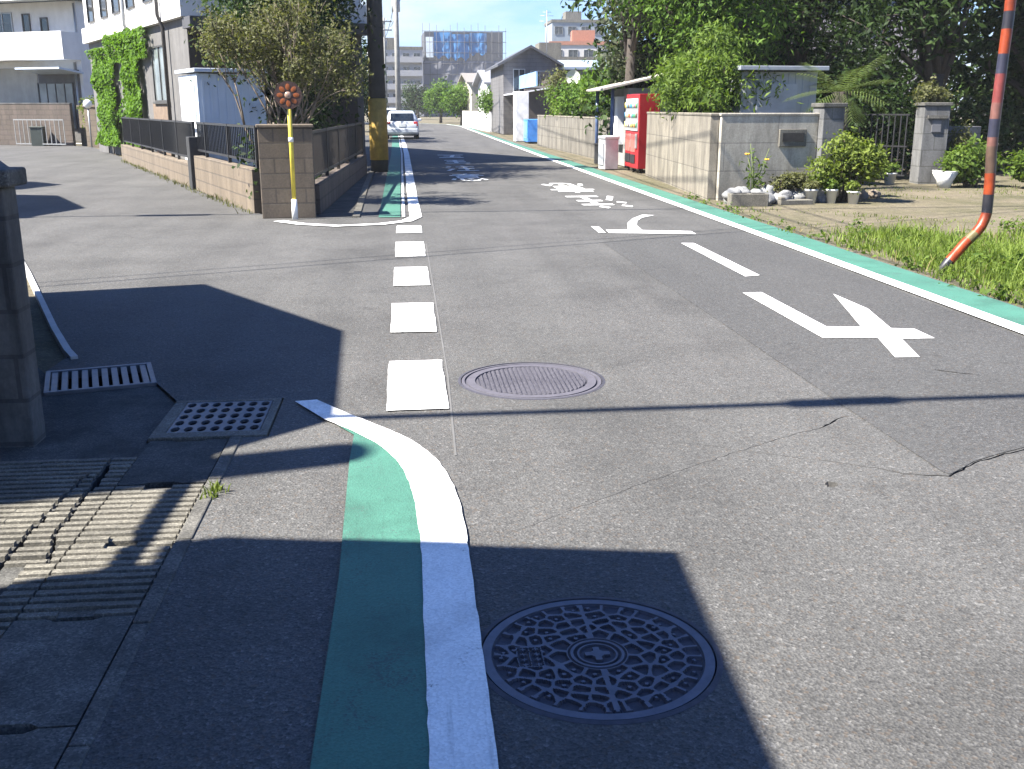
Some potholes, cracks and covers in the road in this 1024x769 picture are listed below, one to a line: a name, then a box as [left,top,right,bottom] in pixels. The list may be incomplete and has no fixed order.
drain grate [43,362,157,396]
drain grate [148,398,282,443]
manhole cover [458,362,605,400]
manhole cover [481,596,723,725]
crack [515,416,1024,532]
